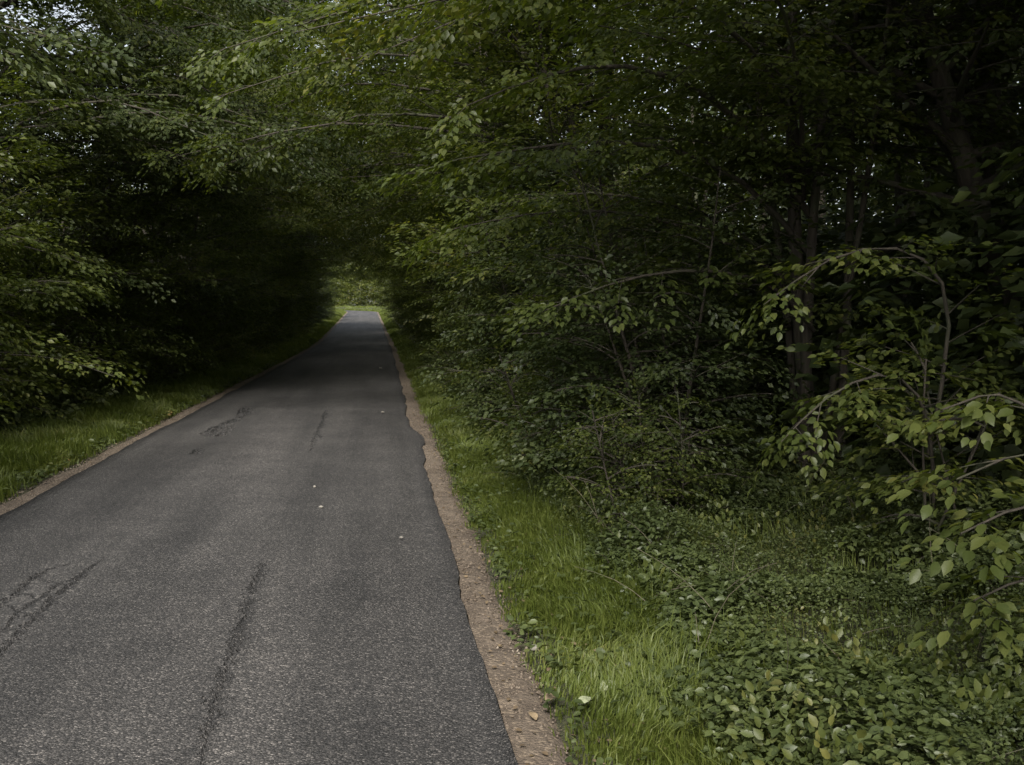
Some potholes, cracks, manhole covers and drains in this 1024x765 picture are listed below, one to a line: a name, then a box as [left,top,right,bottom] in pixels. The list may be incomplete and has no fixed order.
crack [191,563,270,765]
crack [0,557,105,659]
crack [309,410,328,452]
